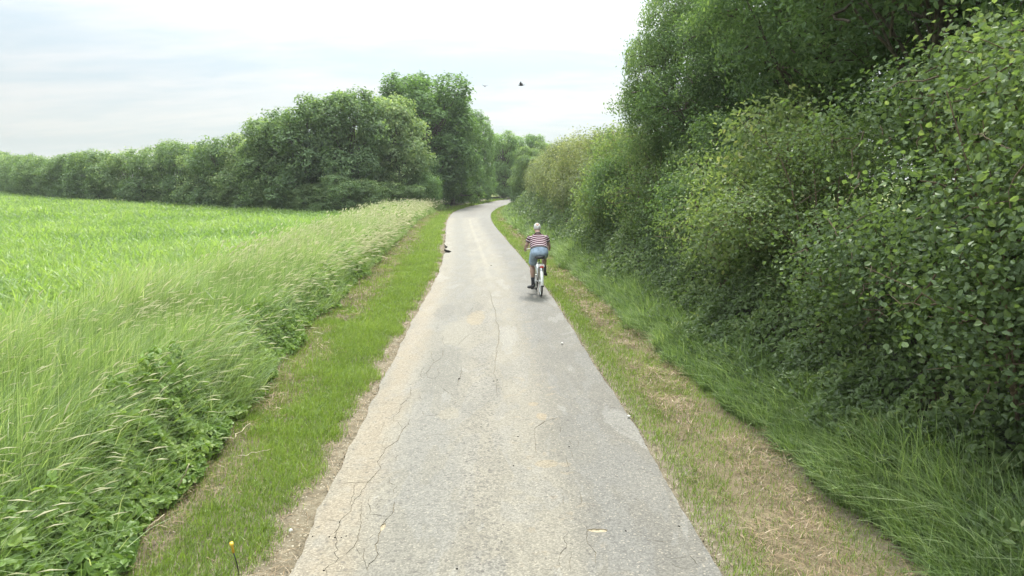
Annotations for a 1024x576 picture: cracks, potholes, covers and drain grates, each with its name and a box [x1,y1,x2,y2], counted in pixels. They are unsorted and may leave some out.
crack [315,337,466,573]
